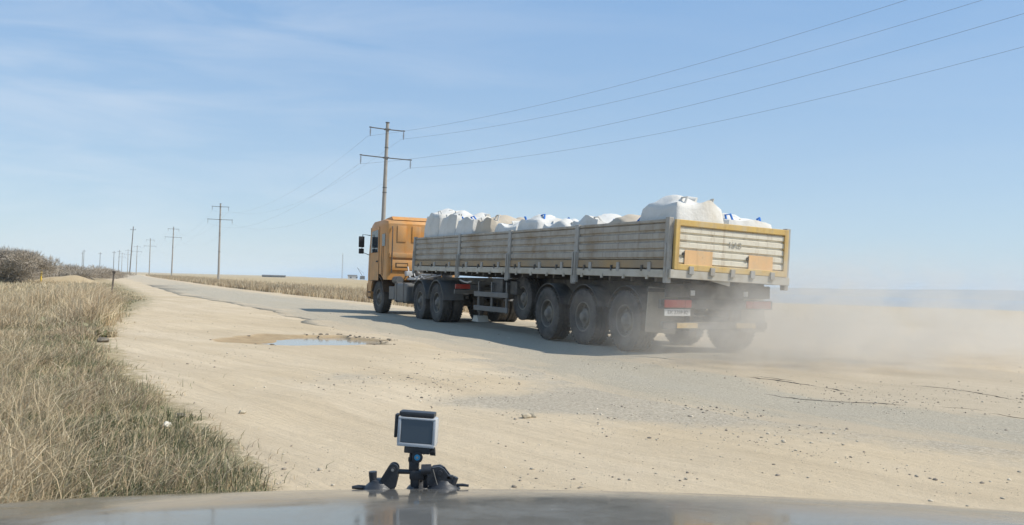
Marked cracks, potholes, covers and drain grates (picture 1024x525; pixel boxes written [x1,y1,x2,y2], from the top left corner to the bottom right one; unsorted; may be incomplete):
crack [925,386,1024,419]
crack [752,376,896,405]
pothole [209,333,396,345]
